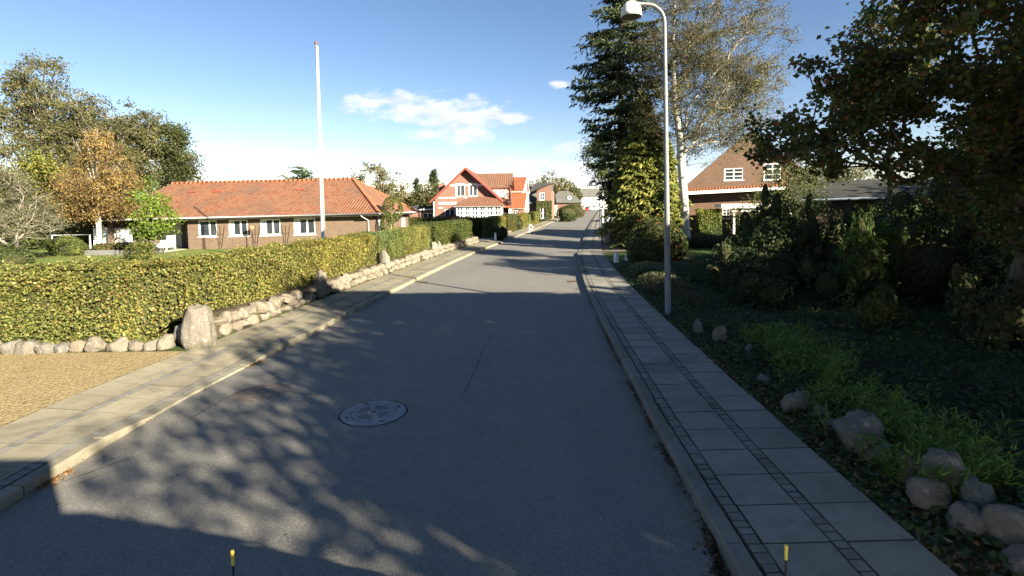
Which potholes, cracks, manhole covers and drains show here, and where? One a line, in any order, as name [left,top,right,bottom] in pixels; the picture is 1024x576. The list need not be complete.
manhole cover [338,400,408,427]
